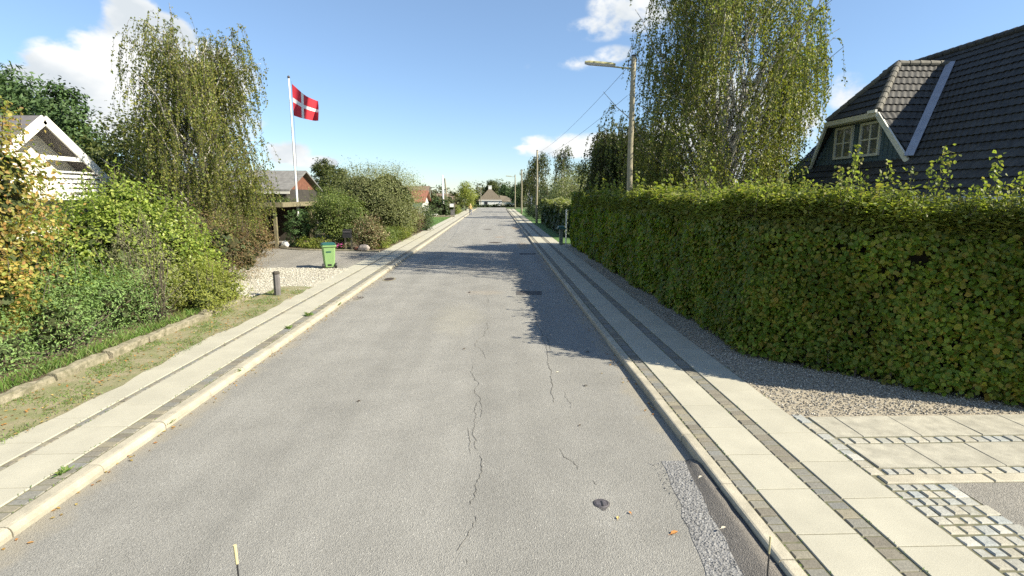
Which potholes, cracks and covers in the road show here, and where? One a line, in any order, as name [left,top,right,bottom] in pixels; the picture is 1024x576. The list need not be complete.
utility cover [593,499,610,511]
crack [532,308,595,484]
crack [457,325,488,559]
